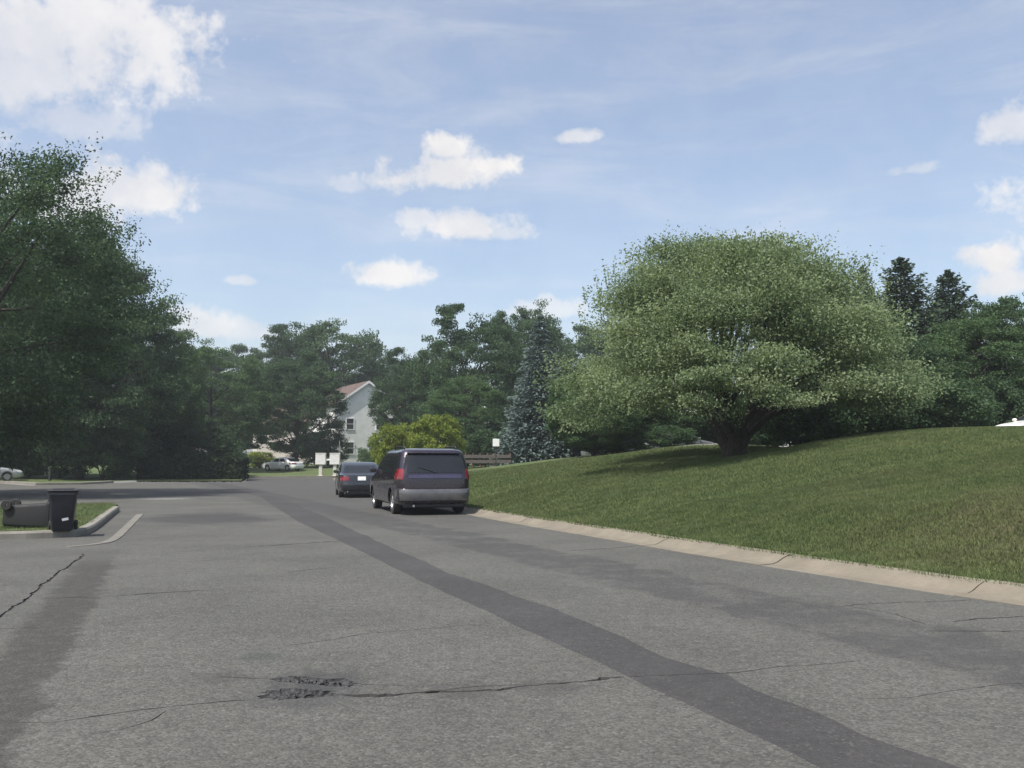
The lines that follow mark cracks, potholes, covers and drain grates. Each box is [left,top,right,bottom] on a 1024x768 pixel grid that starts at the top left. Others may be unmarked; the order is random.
crack [14,660,861,734]
crack [840,600,1024,632]
crack [868,683,1023,699]
pothole [257,688,339,700]
pothole [269,676,359,688]
